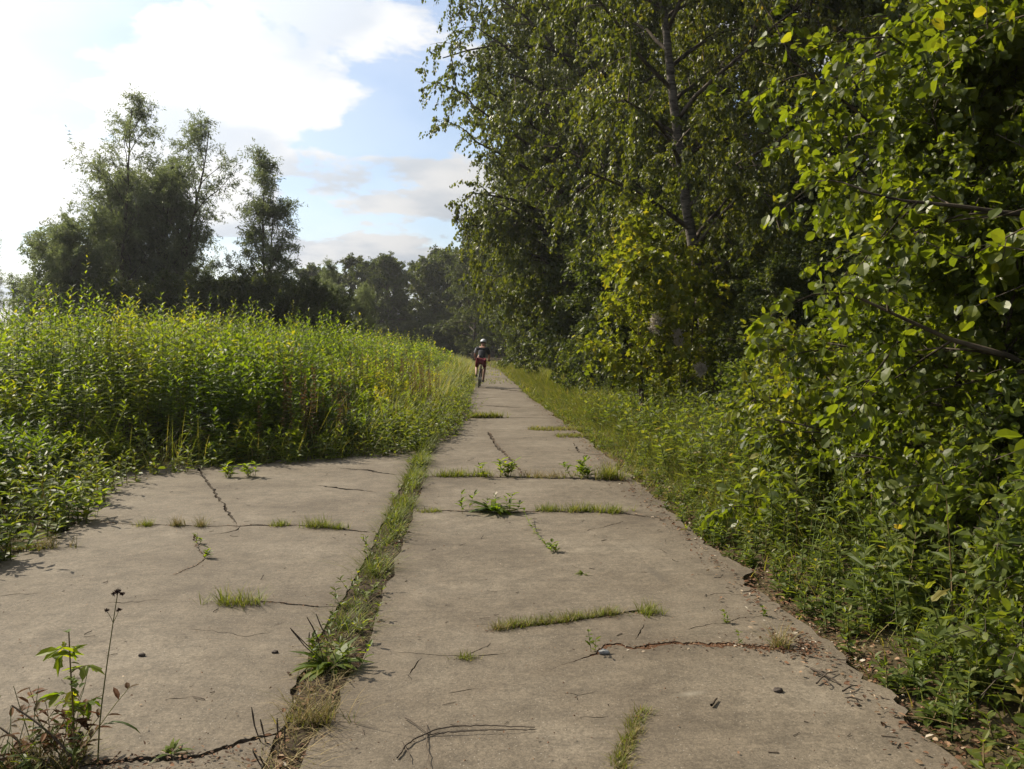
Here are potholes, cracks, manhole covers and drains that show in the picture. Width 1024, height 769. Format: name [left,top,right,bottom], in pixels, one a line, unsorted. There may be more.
crack [434,388,623,481]
crack [93,468,372,574]
crack [15,732,277,769]
crack [399,605,805,677]
crack [316,468,396,492]
